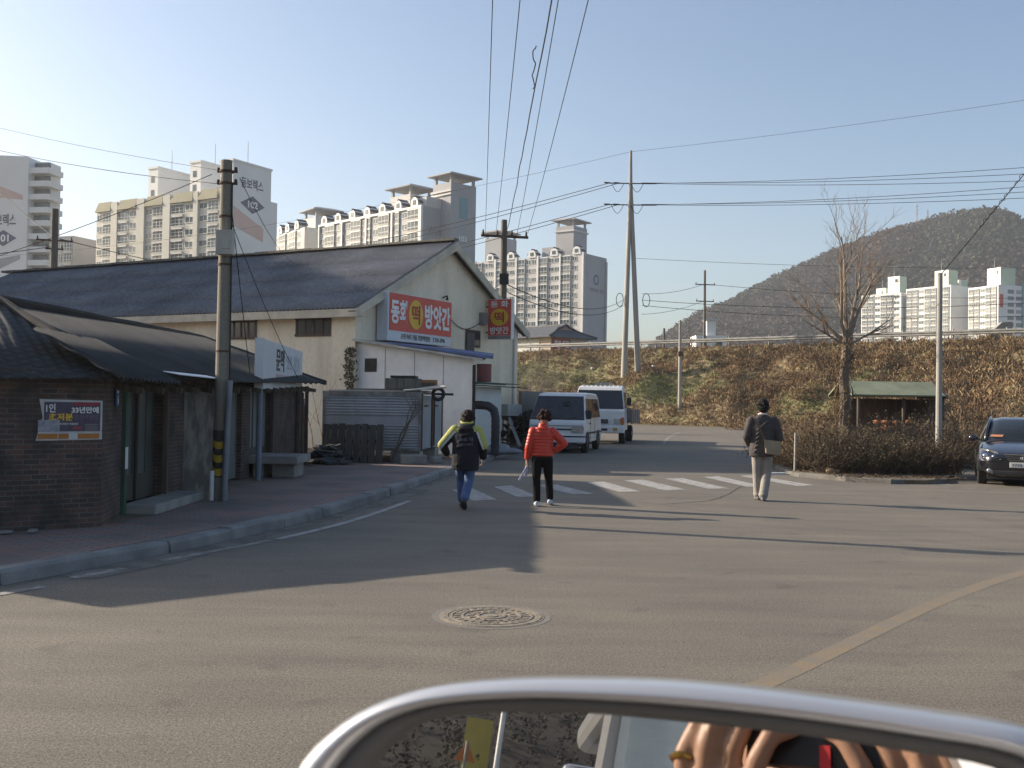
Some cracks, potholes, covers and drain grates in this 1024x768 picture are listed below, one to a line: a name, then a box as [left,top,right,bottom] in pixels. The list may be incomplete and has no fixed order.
manhole cover [432,604,551,630]
